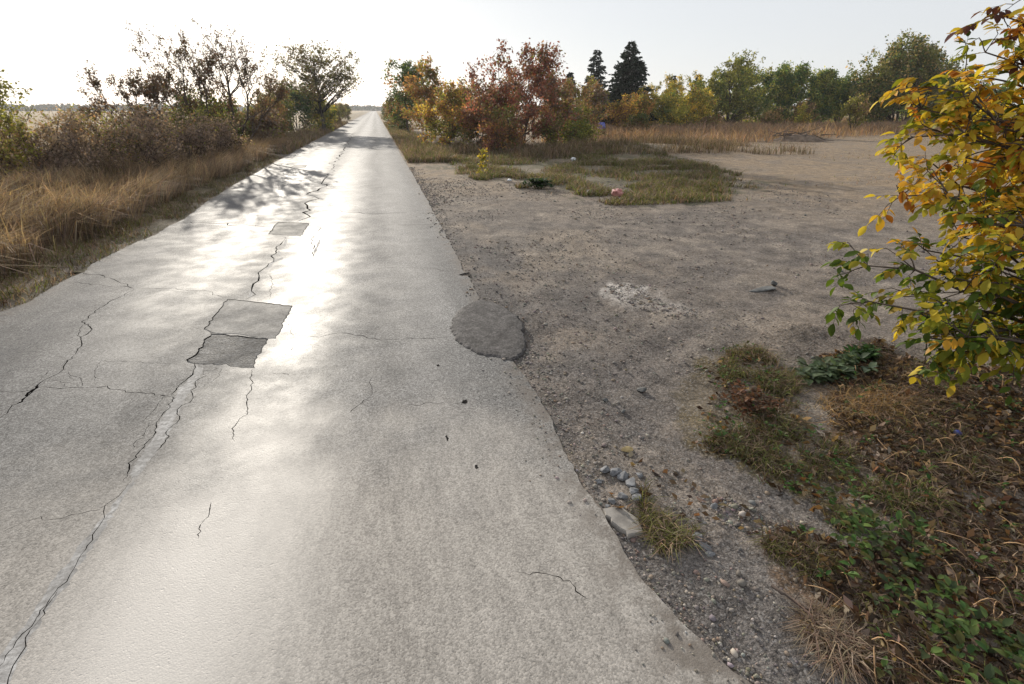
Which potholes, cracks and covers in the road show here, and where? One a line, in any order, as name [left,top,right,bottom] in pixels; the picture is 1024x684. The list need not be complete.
crack [518,572,587,599]
crack [1,479,132,684]
crack [231,370,253,439]
crack [1,272,226,449]
